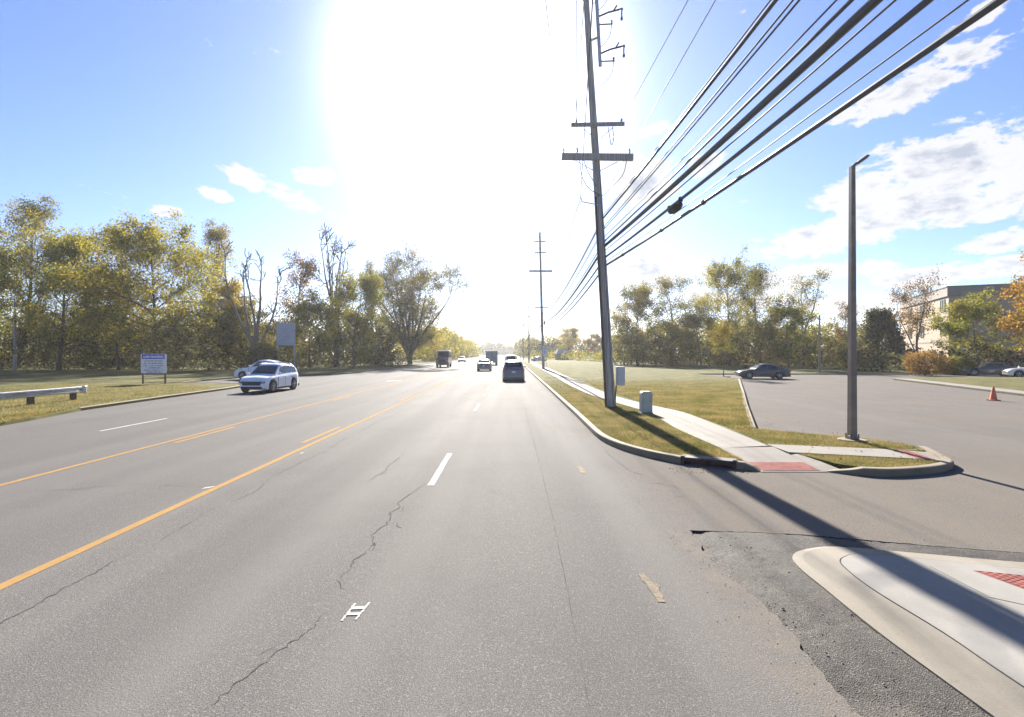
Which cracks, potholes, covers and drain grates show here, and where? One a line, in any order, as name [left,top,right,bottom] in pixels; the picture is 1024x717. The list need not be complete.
crack [1,411,400,623]
drain grate [681,454,737,469]
crack [204,617,320,710]
crack [337,488,419,588]
